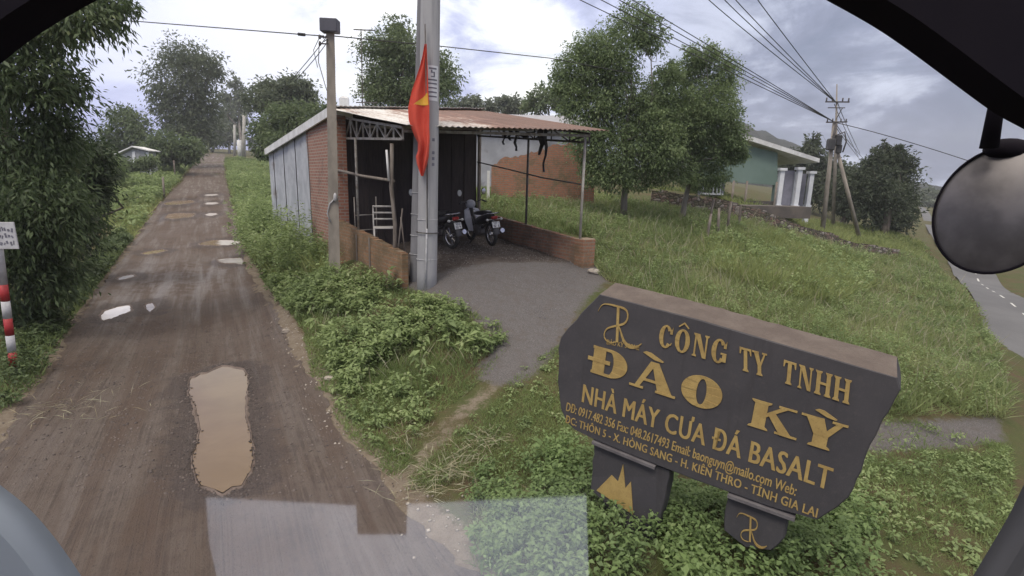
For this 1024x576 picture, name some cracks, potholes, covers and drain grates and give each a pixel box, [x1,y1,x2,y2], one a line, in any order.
pothole [216,257,244,265]
pothole [187,365,256,497]
pothole [98,304,134,321]
